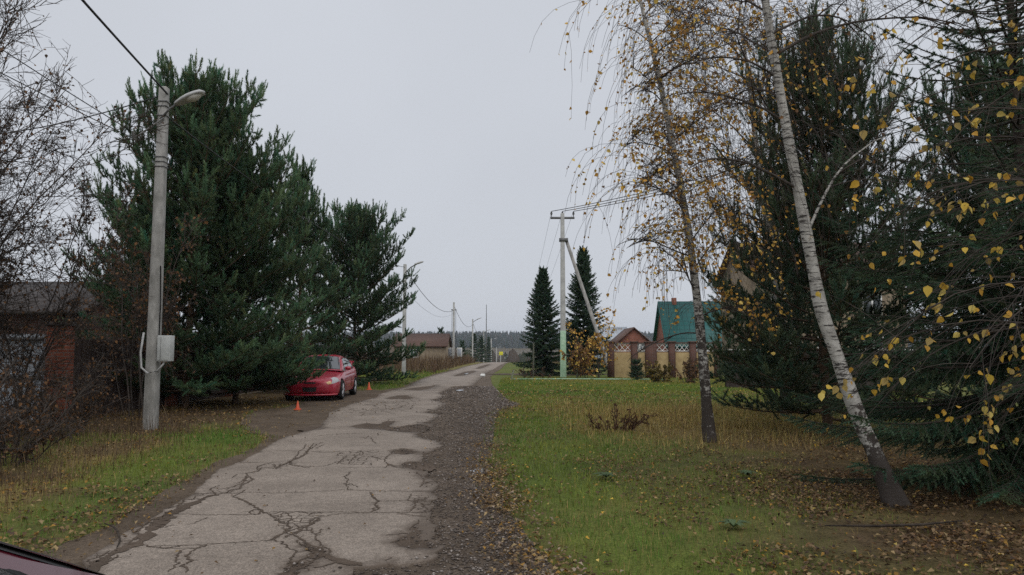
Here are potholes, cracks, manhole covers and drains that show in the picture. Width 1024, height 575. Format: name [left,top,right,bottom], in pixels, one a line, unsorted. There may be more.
pothole [352,421,429,432]
crack [87,398,453,573]
